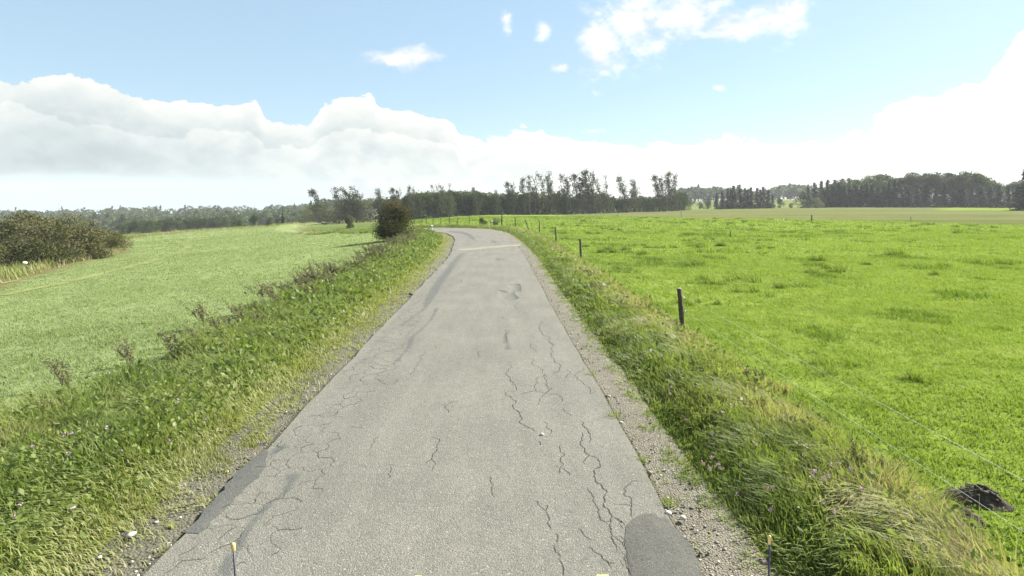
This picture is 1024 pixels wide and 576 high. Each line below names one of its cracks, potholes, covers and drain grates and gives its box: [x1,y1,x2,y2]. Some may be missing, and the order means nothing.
crack [168,425,340,572]
pothole [498,284,522,301]
crack [505,323,636,572]
